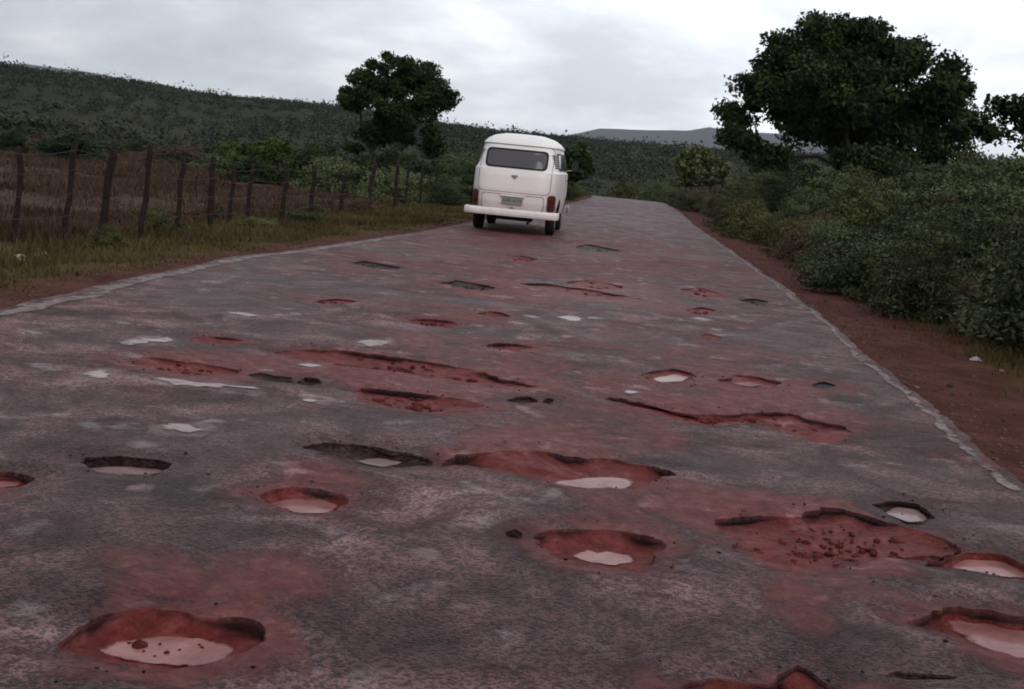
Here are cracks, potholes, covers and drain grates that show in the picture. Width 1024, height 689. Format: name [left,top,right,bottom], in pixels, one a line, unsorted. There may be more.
pothole [275,342,538,389]
pothole [298,435,442,472]
pothole [46,450,187,475]
pothole [717,375,790,391]
pothole [437,441,685,489]
pothole [658,655,864,689]
pothole [54,593,310,683]
pothole [616,368,727,386]
pothole [206,473,383,514]
pothole [439,279,497,290]
pothole [129,352,241,376]
pothole [697,494,975,583]
